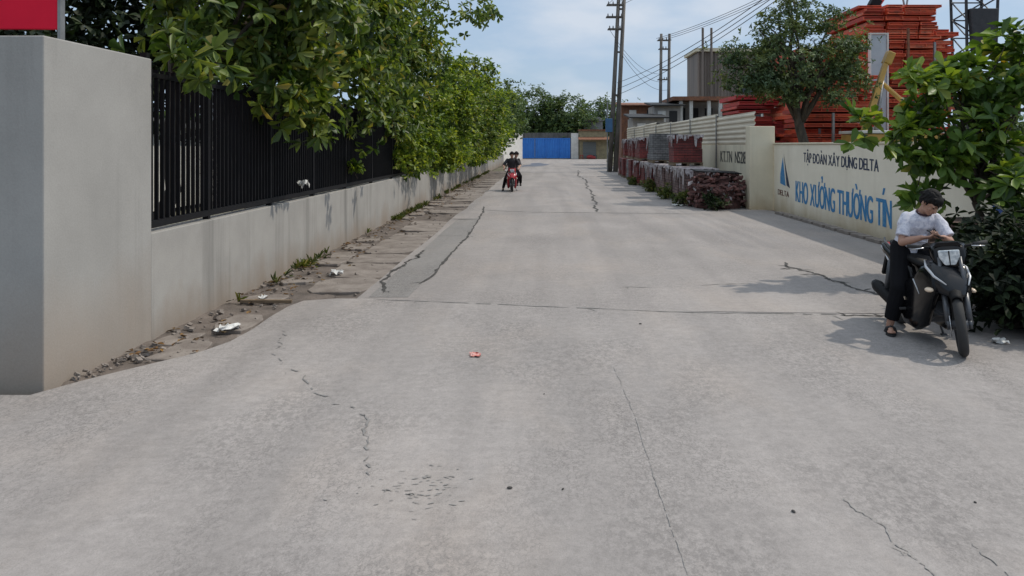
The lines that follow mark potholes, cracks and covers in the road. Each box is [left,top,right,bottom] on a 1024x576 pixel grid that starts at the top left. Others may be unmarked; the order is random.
crack [578,171,599,212]
crack [271,331,473,519]
crack [614,368,689,574]
crack [380,207,485,292]
crack [779,262,878,295]
crack [844,499,936,576]
